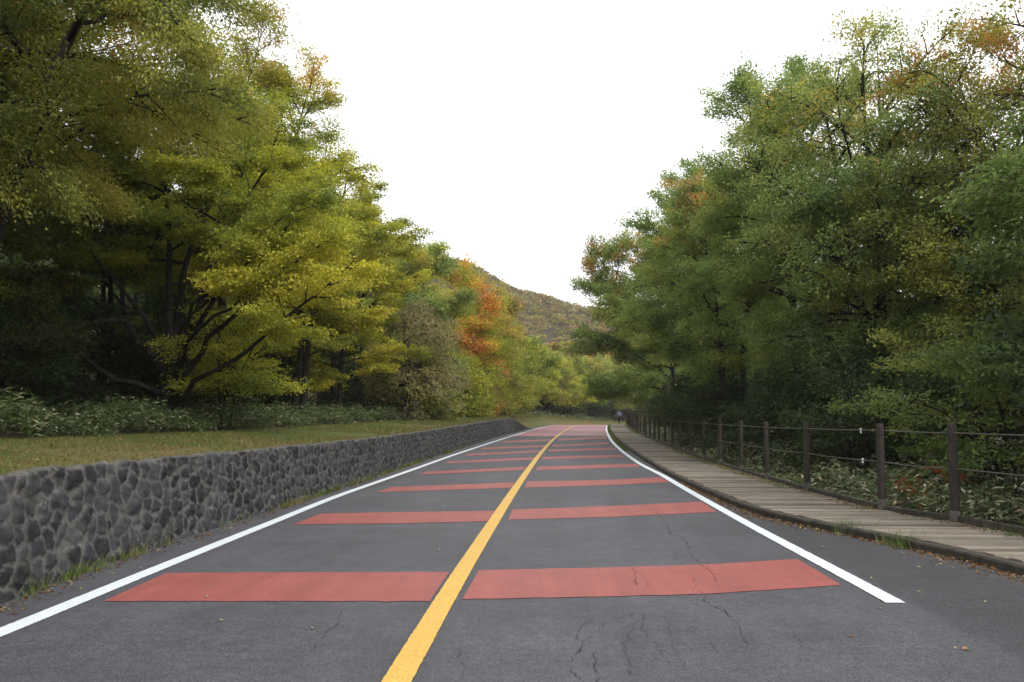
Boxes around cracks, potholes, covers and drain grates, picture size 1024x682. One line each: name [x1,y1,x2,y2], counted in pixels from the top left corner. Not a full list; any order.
crack [568,611,691,682]
crack [658,515,749,644]
